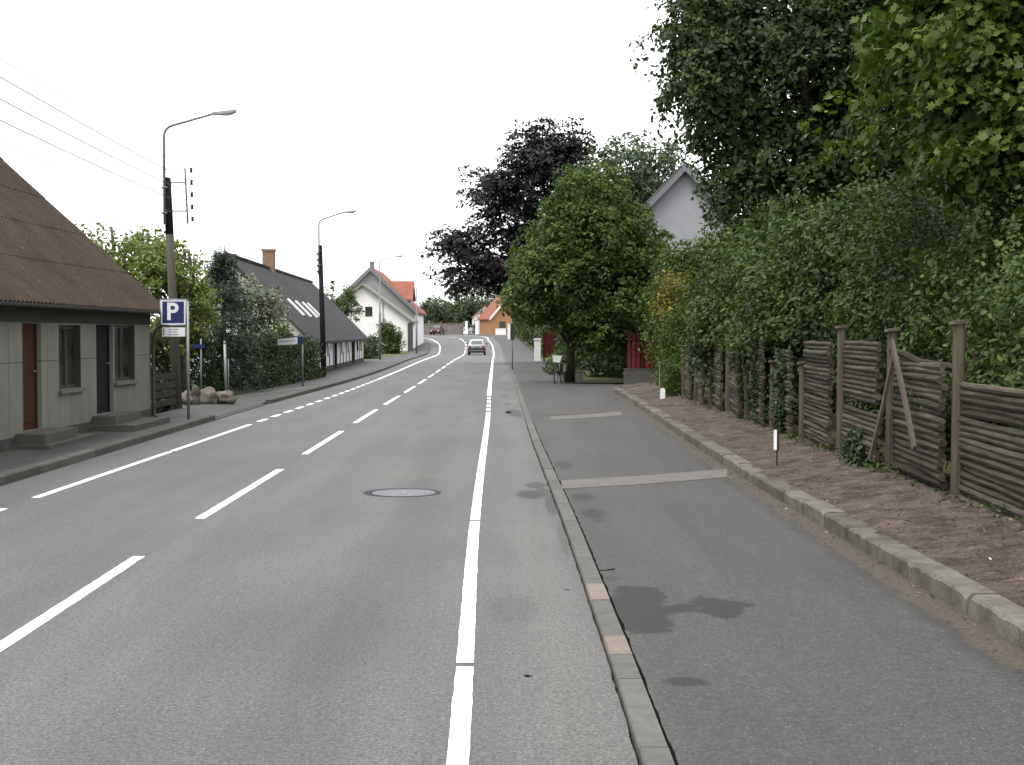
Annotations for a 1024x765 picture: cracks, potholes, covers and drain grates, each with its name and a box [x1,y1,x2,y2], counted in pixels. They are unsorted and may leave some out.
manhole cover [363,488,441,497]
